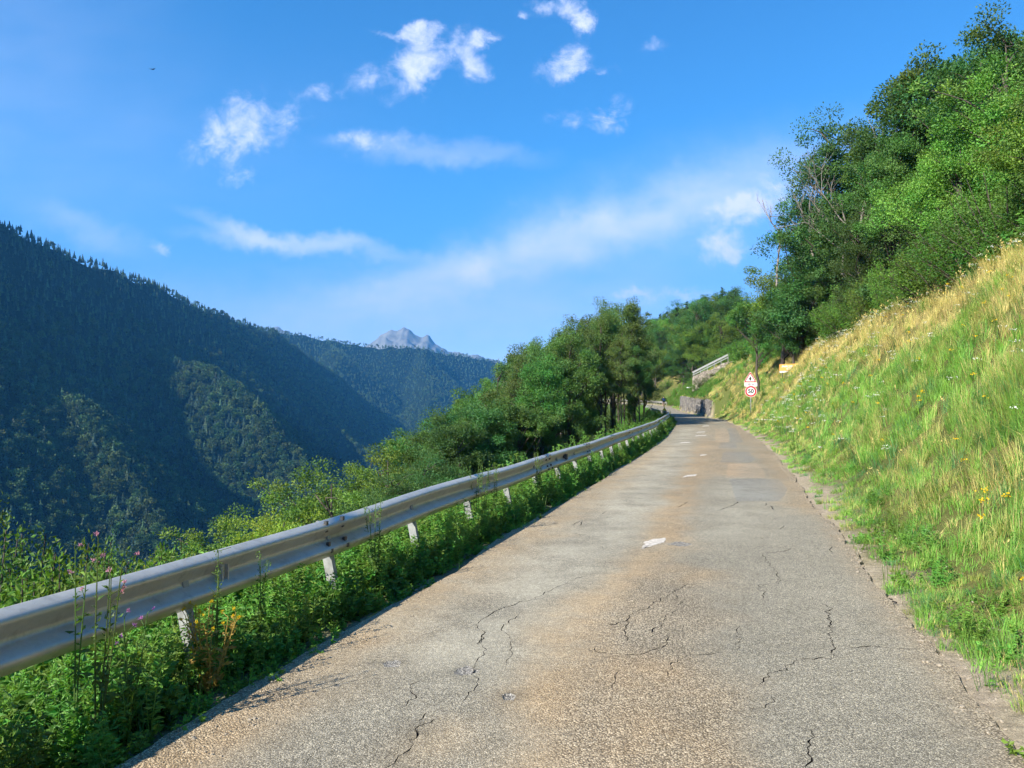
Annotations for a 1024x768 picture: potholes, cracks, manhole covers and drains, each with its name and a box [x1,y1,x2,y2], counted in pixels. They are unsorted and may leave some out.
crack [805,729,815,768]
crack [386,679,443,768]
pothole [454,666,479,675]
crack [750,595,905,710]
crack [584,584,715,689]
